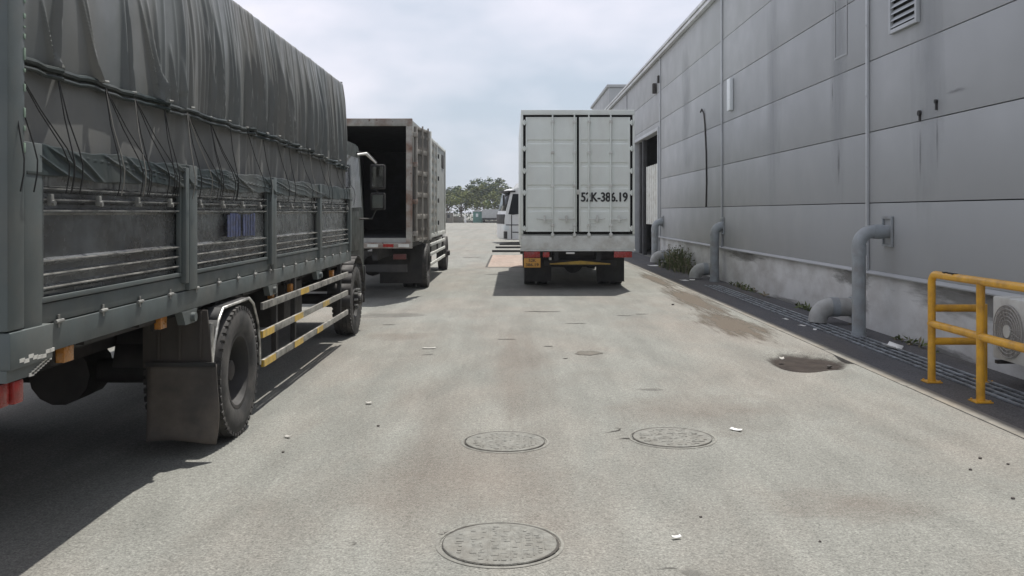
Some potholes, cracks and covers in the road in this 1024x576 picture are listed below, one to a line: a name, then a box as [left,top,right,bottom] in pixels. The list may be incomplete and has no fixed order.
manhole cover [436,522,564,568]
manhole cover [461,431,549,453]
manhole cover [628,427,717,449]
pothole [770,355,843,373]
